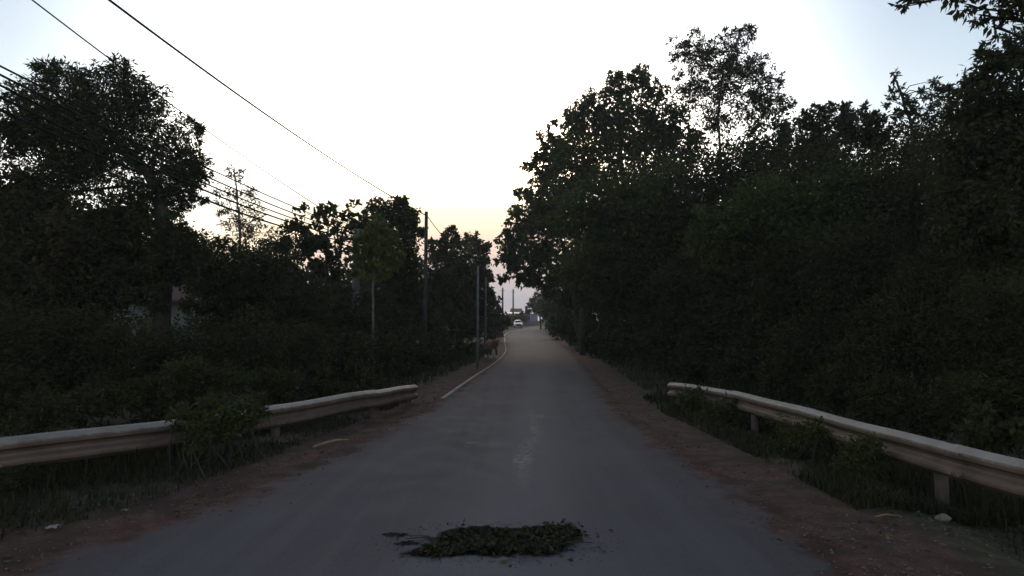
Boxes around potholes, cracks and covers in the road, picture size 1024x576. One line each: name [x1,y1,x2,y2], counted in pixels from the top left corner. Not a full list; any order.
pothole [399,524,582,558]
